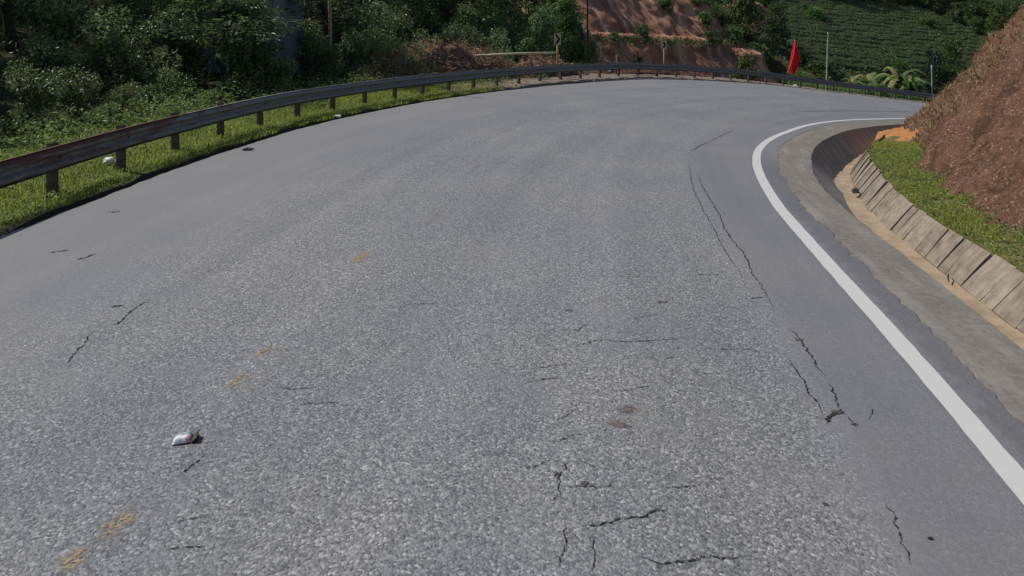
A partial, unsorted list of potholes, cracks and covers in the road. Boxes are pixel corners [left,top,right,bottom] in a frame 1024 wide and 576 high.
crack [527,459,613,499]
crack [689,167,773,309]
crack [527,314,684,382]
crack [588,509,666,569]
crack [639,554,761,564]
crack [791,363,873,425]
